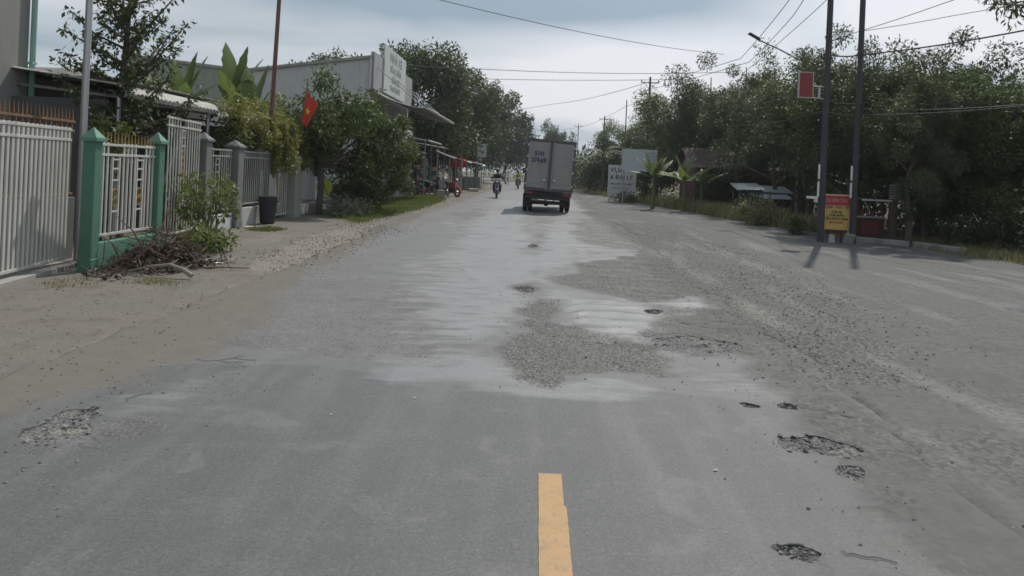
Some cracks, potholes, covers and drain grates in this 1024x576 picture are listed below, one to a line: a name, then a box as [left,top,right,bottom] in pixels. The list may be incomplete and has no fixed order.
pothole [652,335,742,353]
pothole [771,541,825,563]
crack [841,550,897,564]
crack [196,355,256,363]
pothole [772,431,864,467]
pothole [835,463,865,482]
pothole [18,407,104,446]
